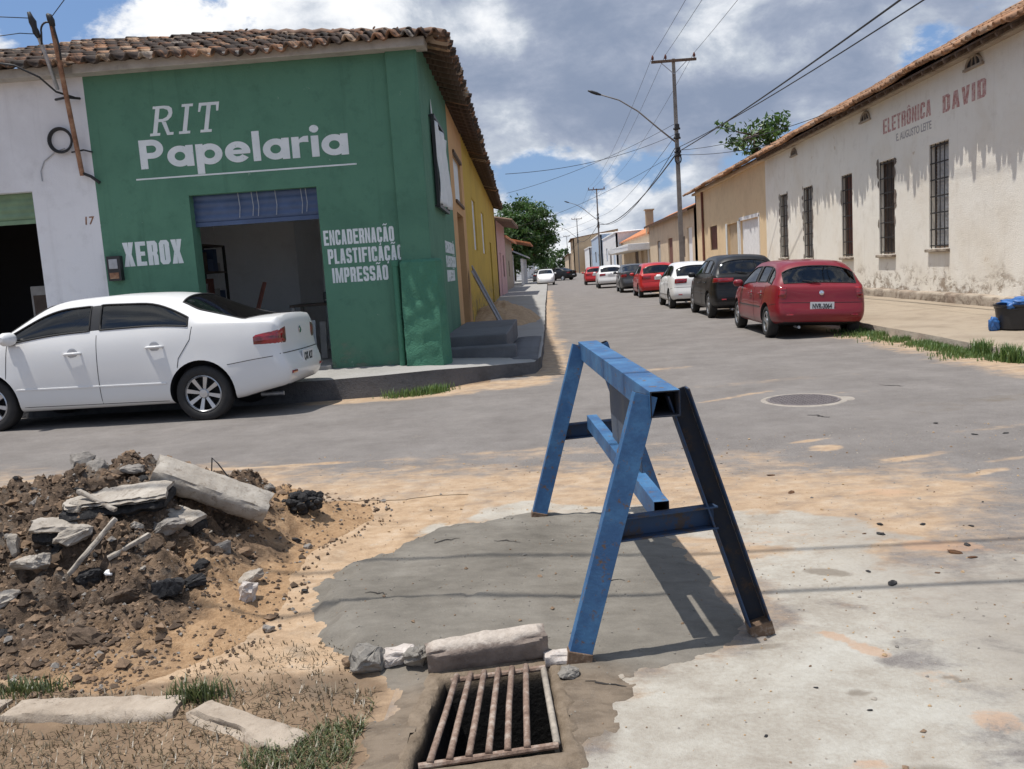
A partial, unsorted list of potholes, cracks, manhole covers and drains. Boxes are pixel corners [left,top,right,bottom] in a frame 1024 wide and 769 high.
drain grate [395,658,589,769]
manhole cover [761,393,855,407]
